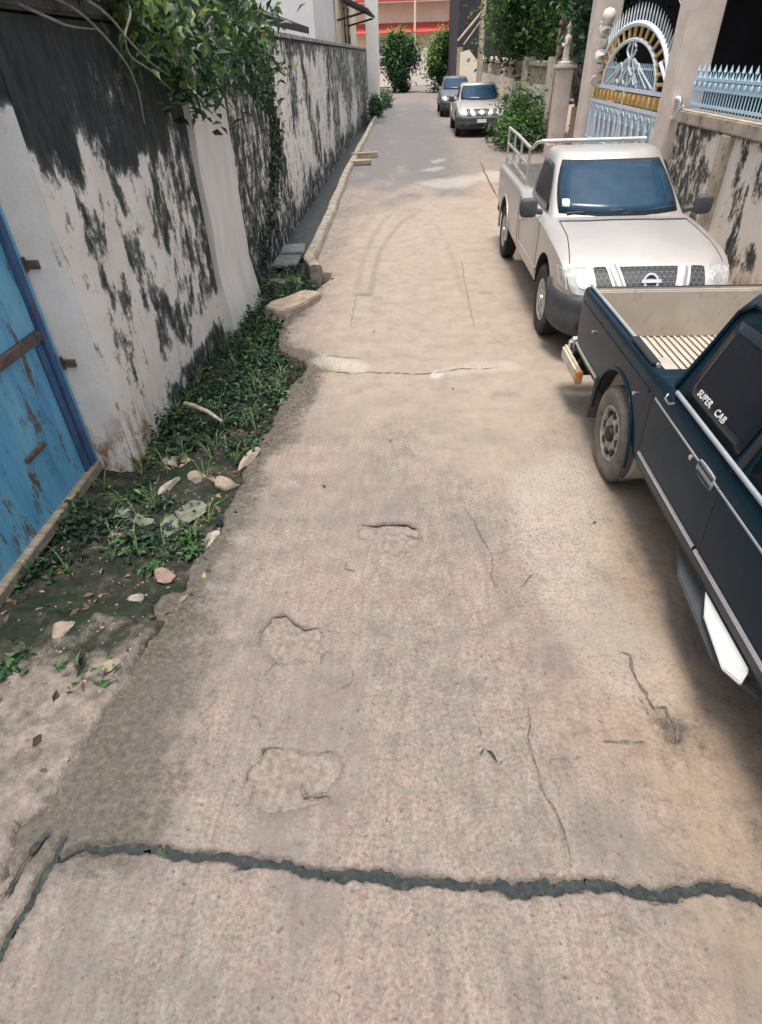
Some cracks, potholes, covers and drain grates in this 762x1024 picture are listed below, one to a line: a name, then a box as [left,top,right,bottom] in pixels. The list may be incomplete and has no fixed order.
crack [461,261,475,328]
crack [466,508,496,585]
pothole [358,522,421,556]
crack [0,704,762,963]
crack [481,163,497,196]
crack [604,651,681,744]
pothole [259,614,321,665]
pothole [246,747,342,813]
